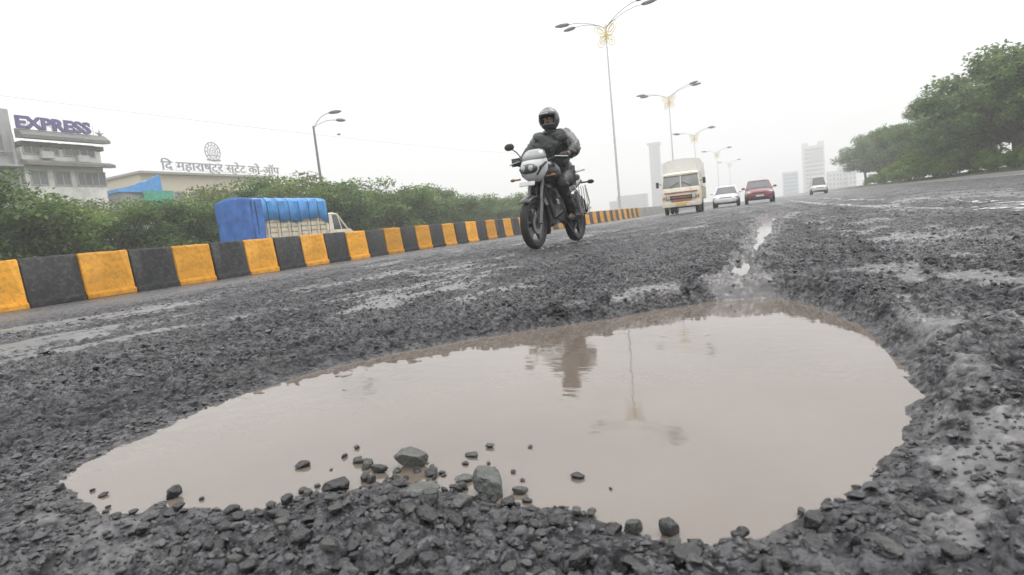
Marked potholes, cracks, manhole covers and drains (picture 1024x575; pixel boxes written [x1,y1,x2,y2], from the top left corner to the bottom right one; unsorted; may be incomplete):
pothole [0,273,1010,575]
